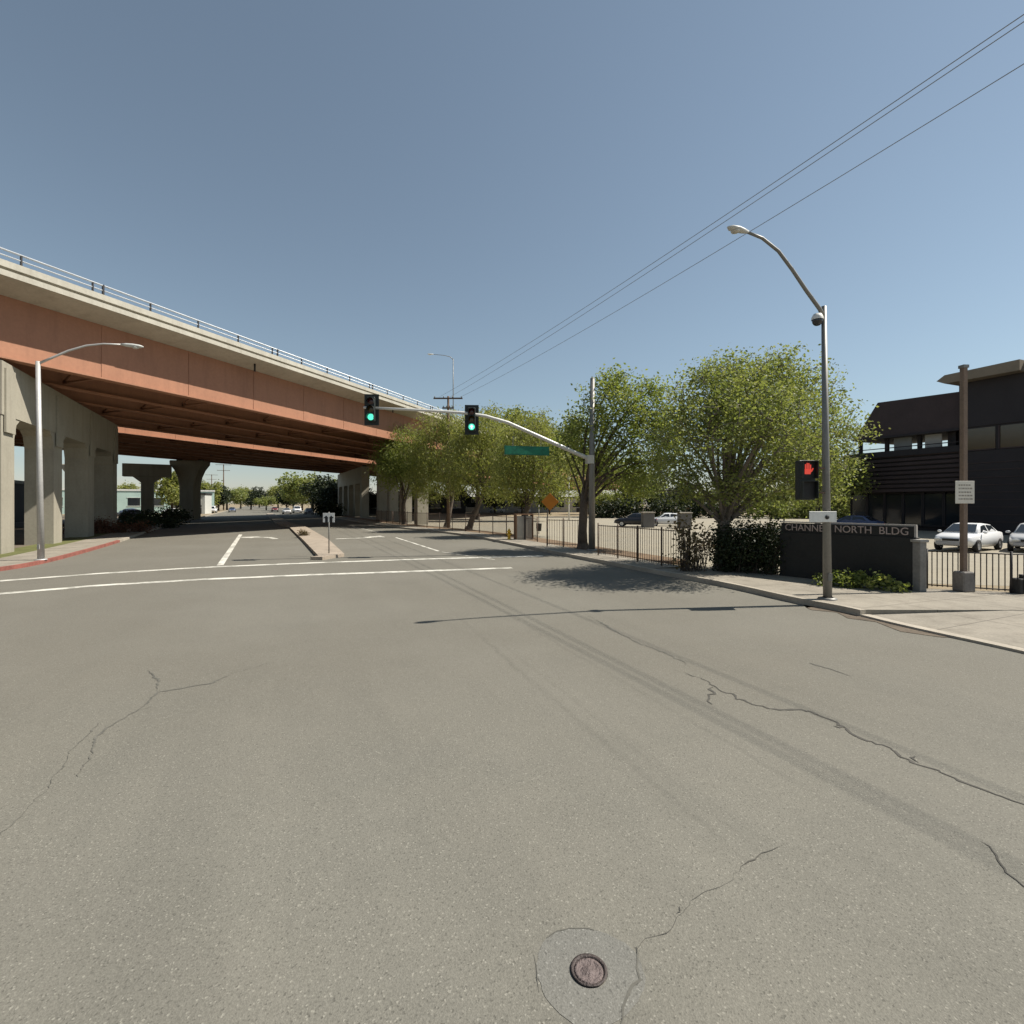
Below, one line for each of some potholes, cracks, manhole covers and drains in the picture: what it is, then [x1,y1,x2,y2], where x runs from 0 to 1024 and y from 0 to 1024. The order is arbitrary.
crack [983,842,1024,886]
crack [620,846,779,1024]
crack [676,670,1023,804]
crack [1,661,273,832]
